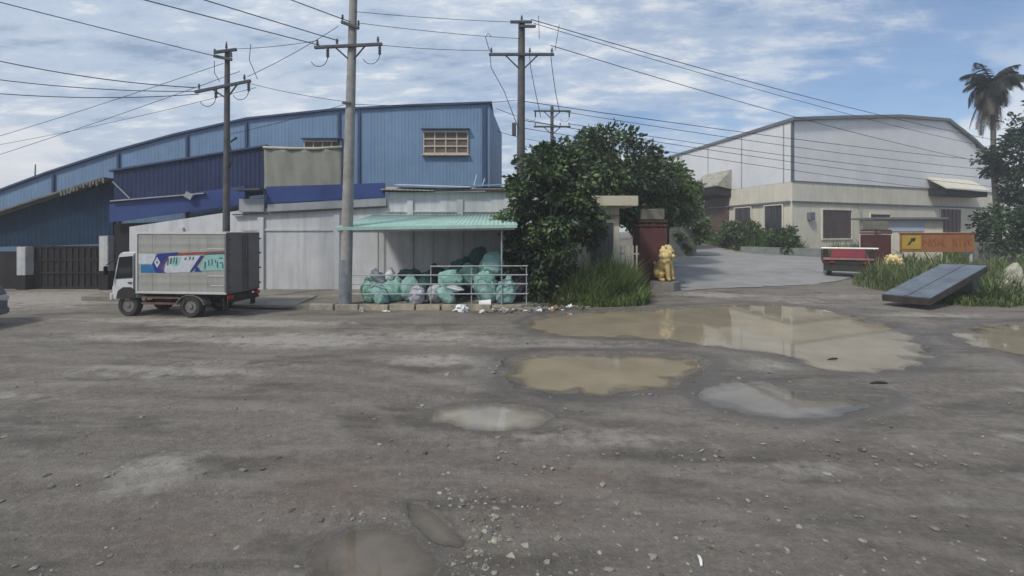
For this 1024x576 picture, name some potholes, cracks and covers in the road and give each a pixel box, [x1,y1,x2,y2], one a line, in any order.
pothole [407,501,465,548]
pothole [303,525,442,576]
pothole [695,379,895,419]
pothole [493,351,712,396]
pothole [427,402,555,432]
pothole [520,303,940,374]
pothole [946,321,1024,356]
